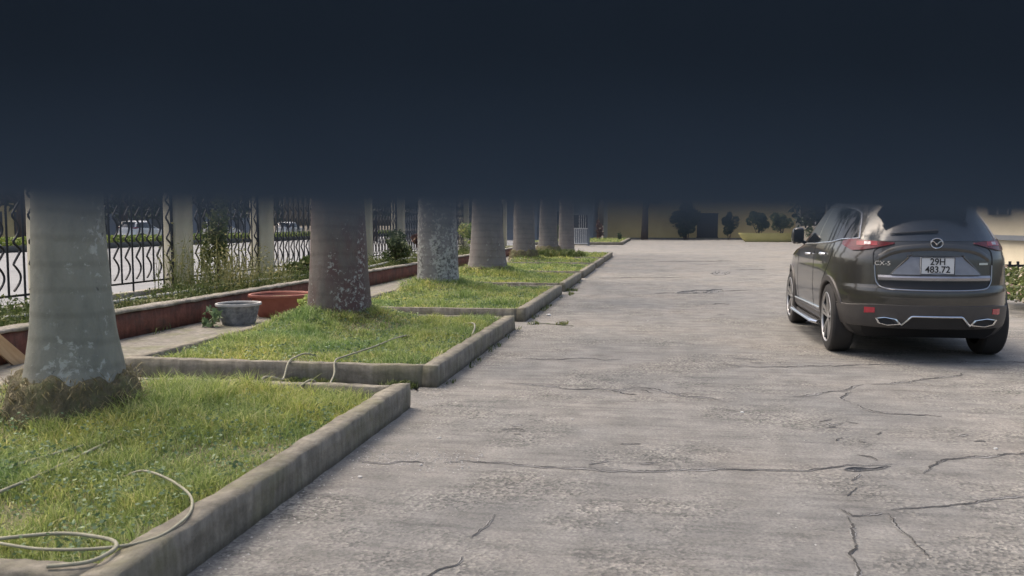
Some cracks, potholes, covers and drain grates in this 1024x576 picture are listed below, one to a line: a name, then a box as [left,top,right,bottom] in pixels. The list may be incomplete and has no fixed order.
crack [451,361,1024,576]
crack [427,556,464,576]
